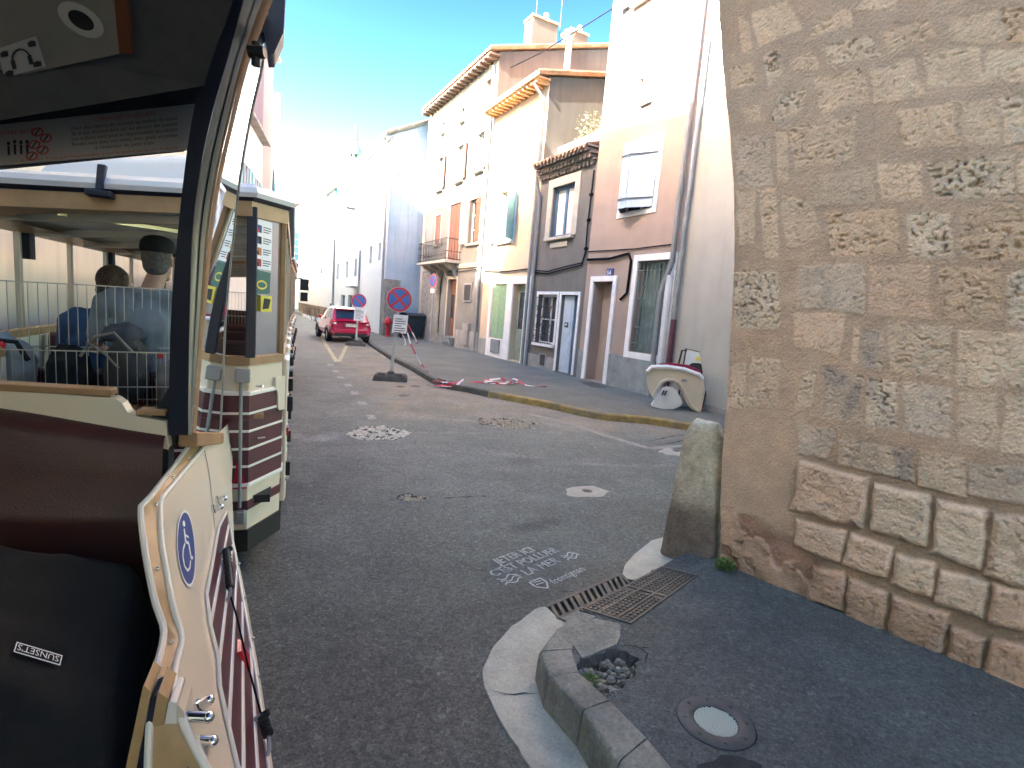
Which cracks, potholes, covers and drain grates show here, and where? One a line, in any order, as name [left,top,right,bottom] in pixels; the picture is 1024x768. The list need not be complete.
pothole [478,418,541,429]
pothole [346,425,411,440]
pothole [576,647,641,697]
drain grate [546,573,630,620]
pothole [395,493,426,502]
